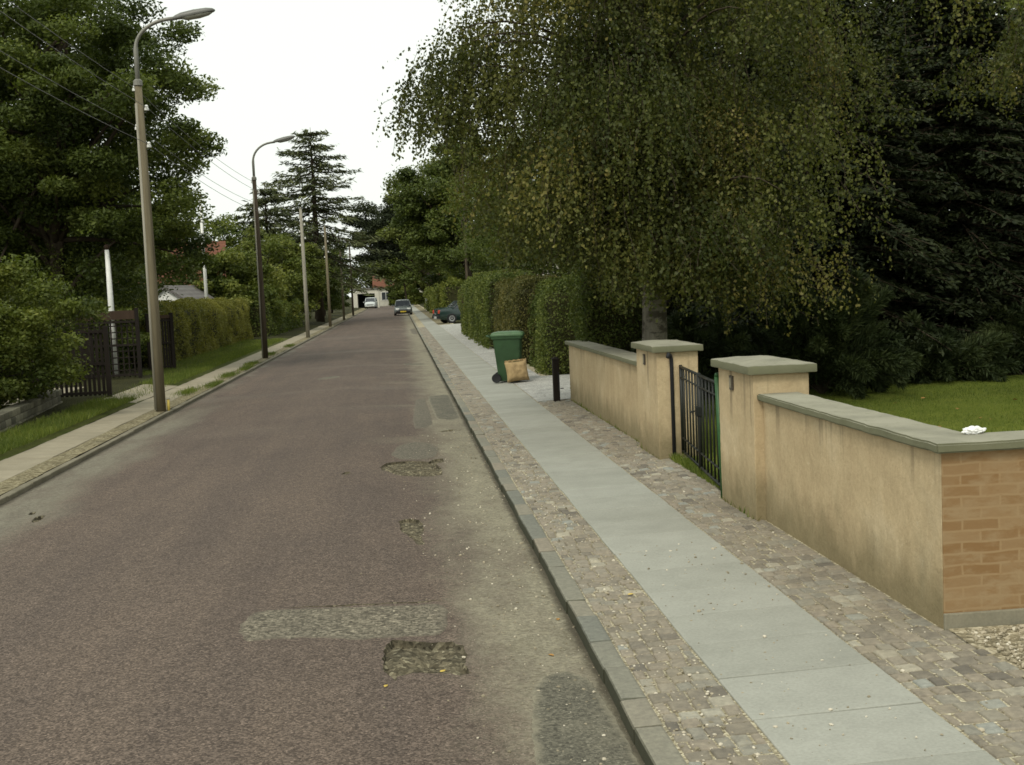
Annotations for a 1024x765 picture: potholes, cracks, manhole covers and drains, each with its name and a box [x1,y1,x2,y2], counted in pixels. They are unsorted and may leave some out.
pothole [380,459,444,477]
pothole [382,640,471,681]
pothole [398,519,425,545]
